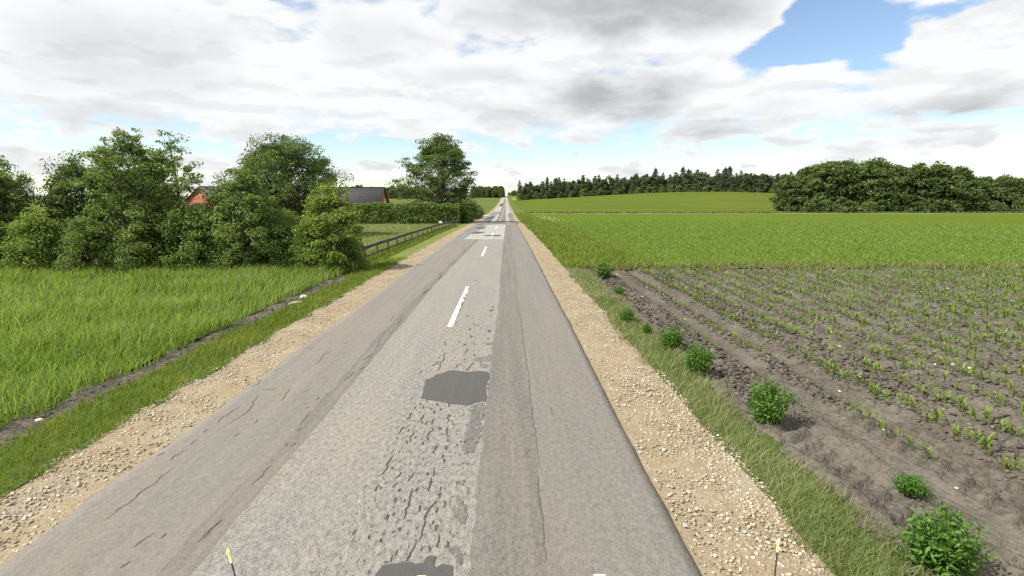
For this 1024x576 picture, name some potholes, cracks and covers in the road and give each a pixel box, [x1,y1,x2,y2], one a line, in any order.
crack [109,382,289,517]
crack [375,399,451,562]
